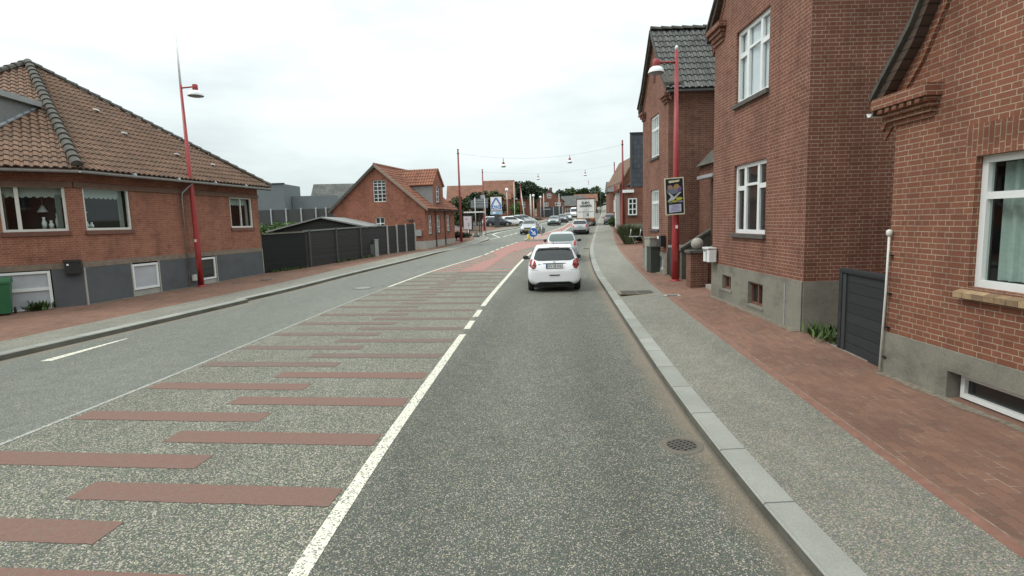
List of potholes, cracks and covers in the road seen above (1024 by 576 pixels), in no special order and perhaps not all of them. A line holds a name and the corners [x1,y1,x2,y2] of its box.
drain grate [659,437,704,454]
